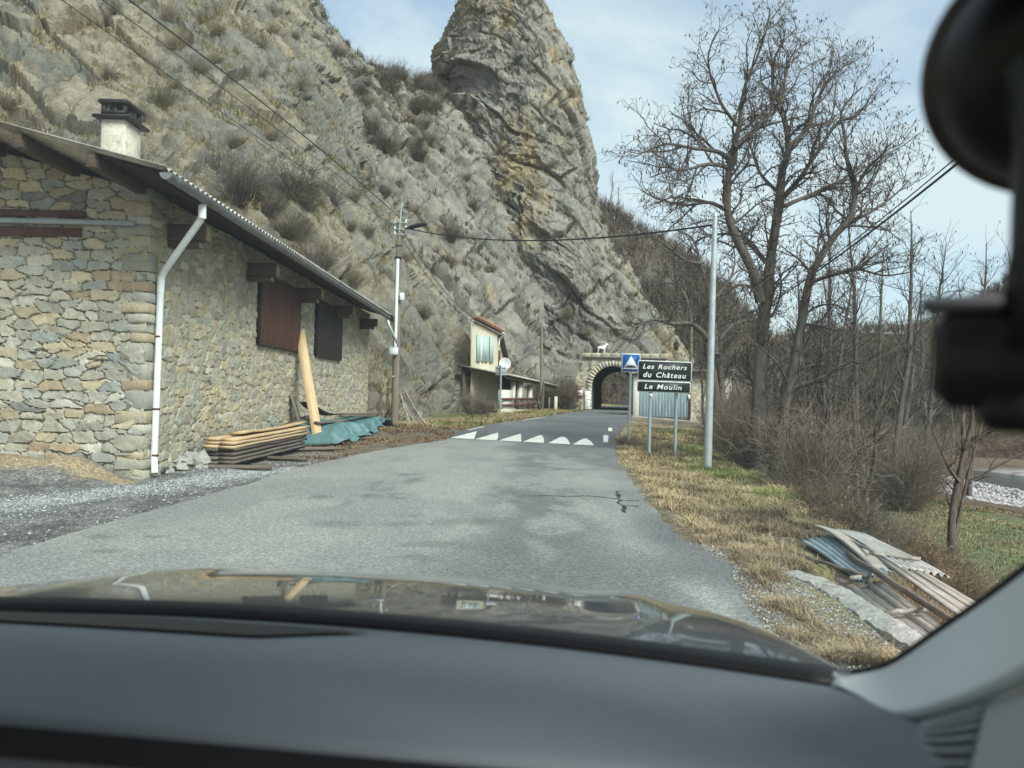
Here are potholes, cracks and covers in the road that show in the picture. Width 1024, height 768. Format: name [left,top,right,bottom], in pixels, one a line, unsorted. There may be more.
crack [538,491,640,513]
